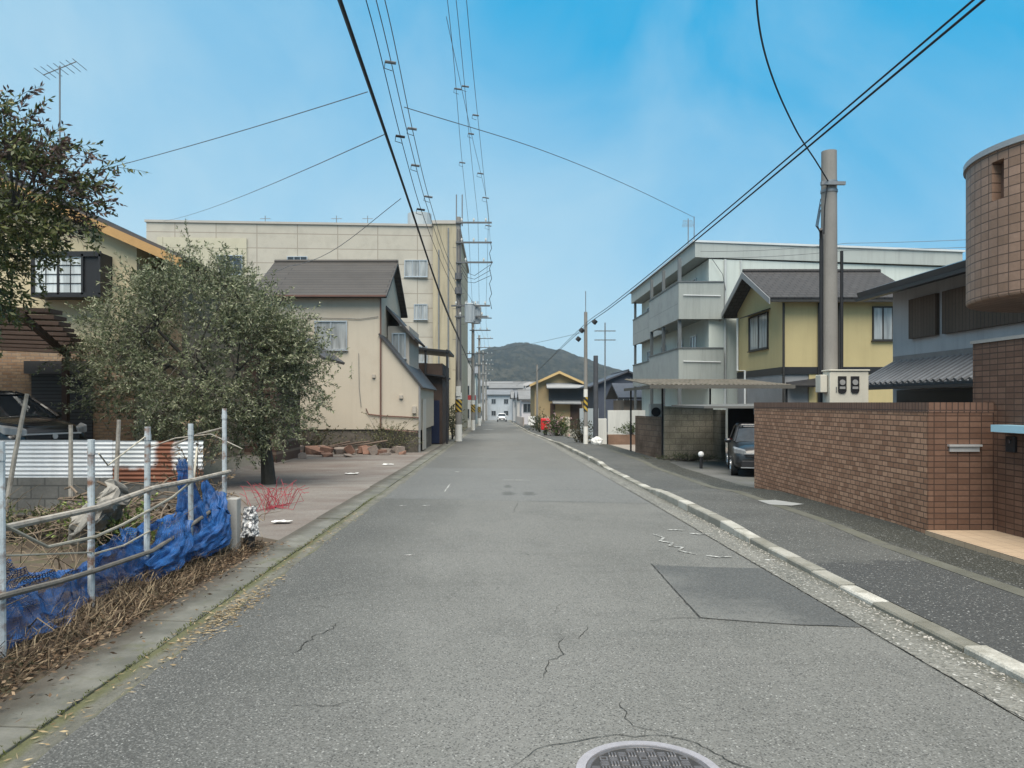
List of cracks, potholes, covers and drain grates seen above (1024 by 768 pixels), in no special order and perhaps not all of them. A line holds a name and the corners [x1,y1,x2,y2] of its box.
manhole cover [576,741,719,768]
crack [511,700,751,768]
